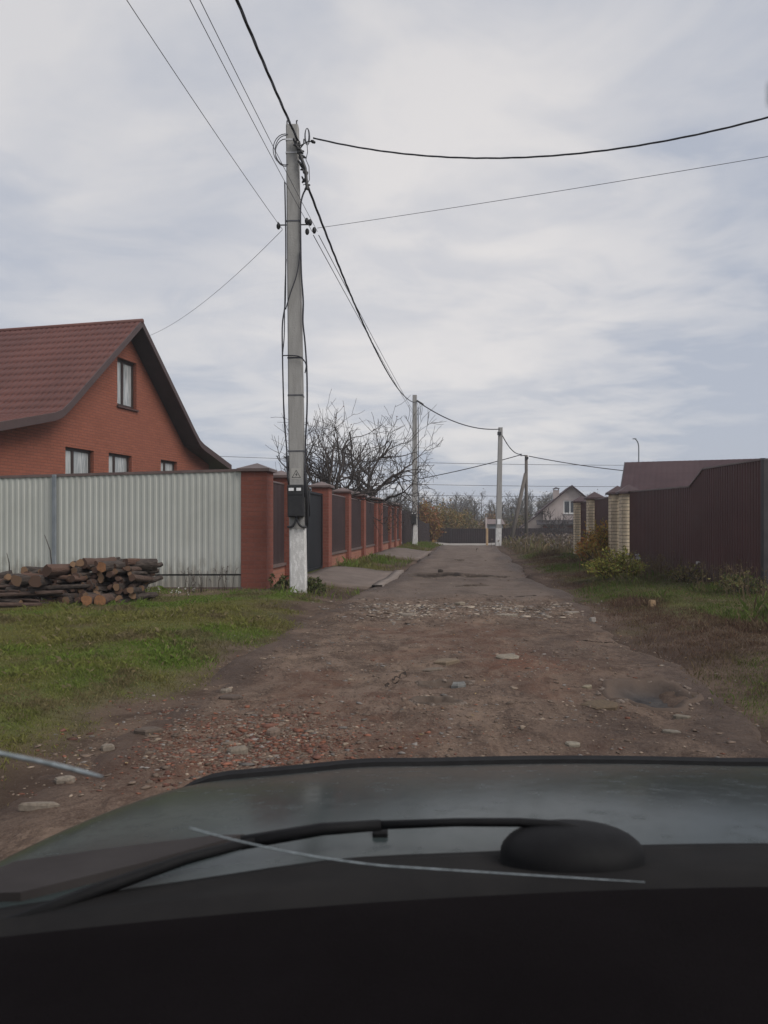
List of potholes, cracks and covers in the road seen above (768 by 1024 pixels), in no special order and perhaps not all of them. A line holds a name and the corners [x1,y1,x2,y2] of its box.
pothole [595,677,711,712]
